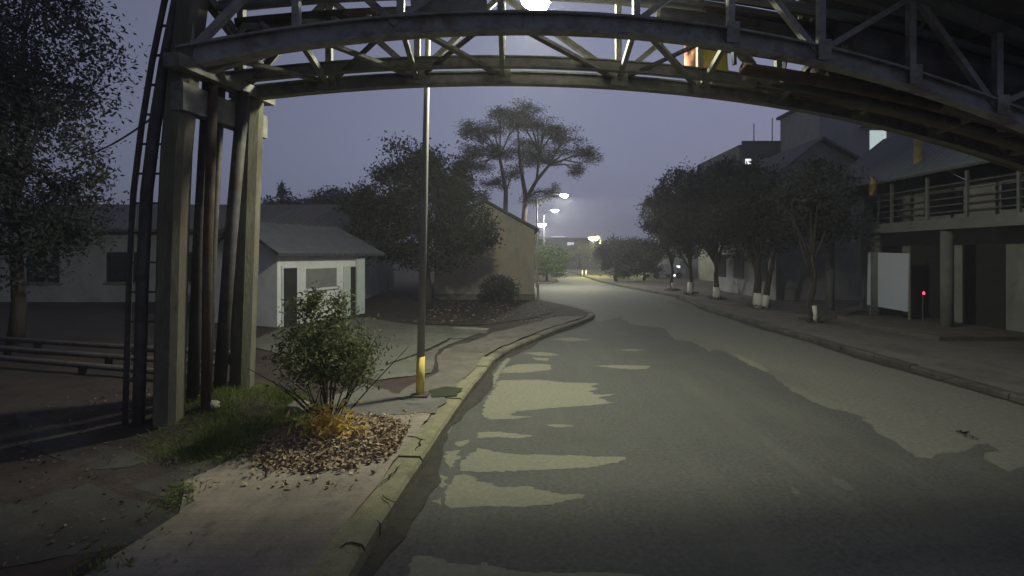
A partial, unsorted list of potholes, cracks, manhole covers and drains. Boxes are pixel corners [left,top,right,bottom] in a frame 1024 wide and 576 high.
crack [388,337,481,364]
